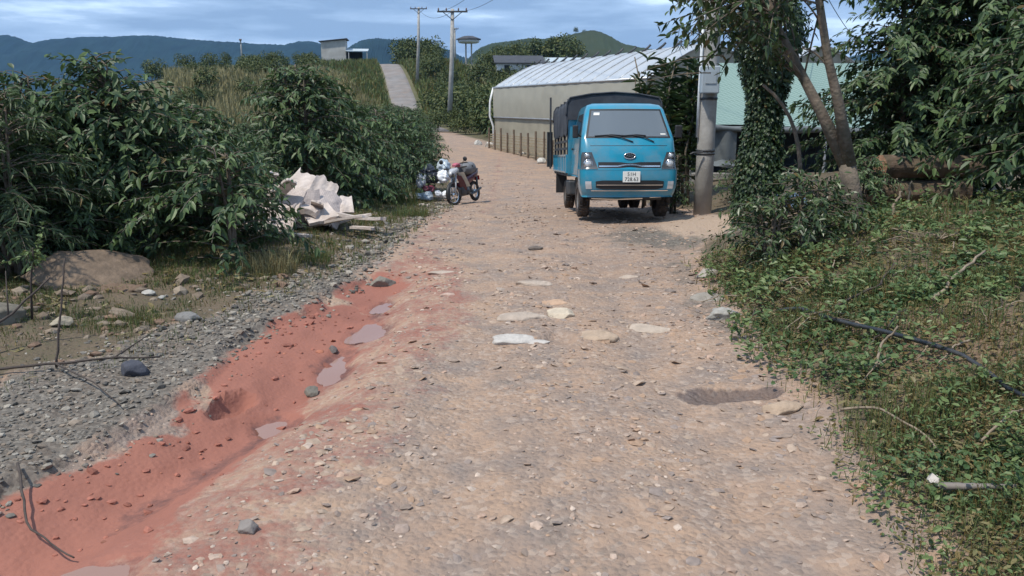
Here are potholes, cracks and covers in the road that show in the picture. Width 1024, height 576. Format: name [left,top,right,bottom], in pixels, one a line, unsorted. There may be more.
pothole [673,385,783,406]
pothole [244,411,315,442]
pothole [339,314,404,350]
pothole [304,346,369,398]
